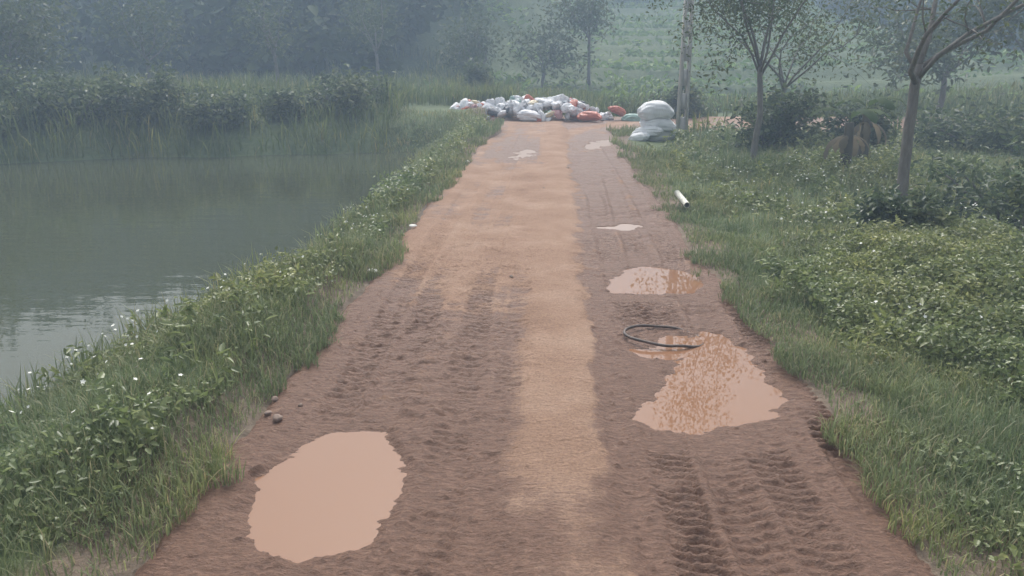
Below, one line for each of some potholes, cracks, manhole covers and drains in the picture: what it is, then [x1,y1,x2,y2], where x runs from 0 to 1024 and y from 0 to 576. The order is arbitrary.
pothole [600,264,709,295]
pothole [581,139,618,150]
pothole [622,328,794,438]
pothole [235,424,422,566]
pothole [594,221,648,232]
pothole [504,149,541,160]
